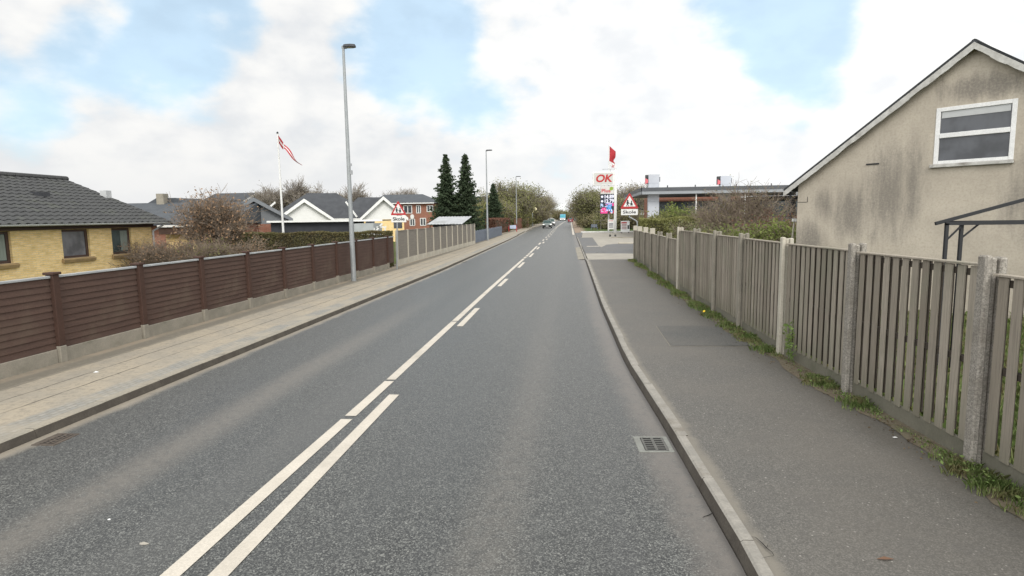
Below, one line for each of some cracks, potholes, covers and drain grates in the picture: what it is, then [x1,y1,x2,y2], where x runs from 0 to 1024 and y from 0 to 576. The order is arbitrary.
drain grate [32,433,80,446]
drain grate [633,436,675,452]
